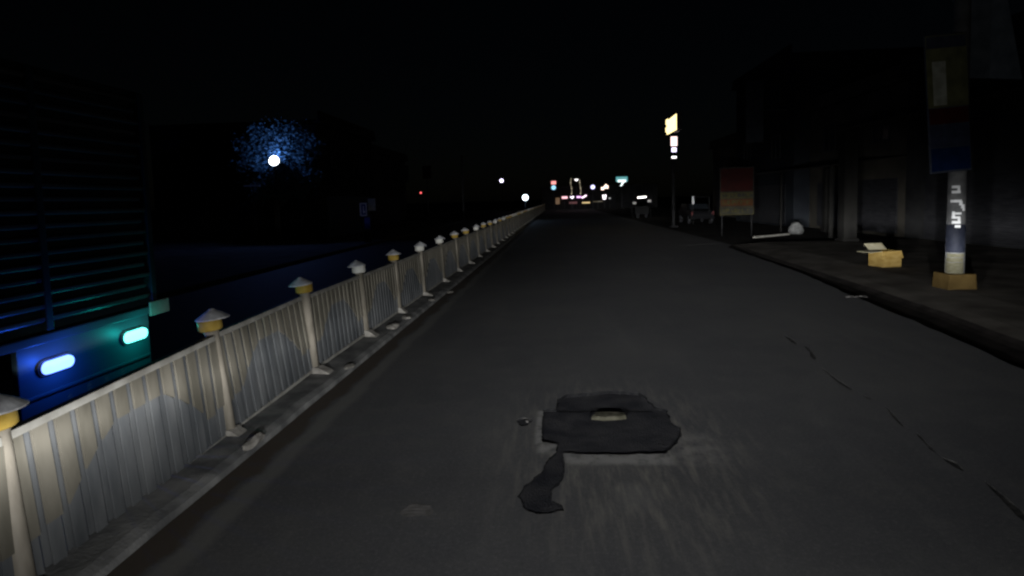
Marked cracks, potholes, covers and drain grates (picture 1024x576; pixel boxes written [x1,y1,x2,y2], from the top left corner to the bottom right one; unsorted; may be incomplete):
pothole [517,390,682,514]
crack [785,335,1024,521]
